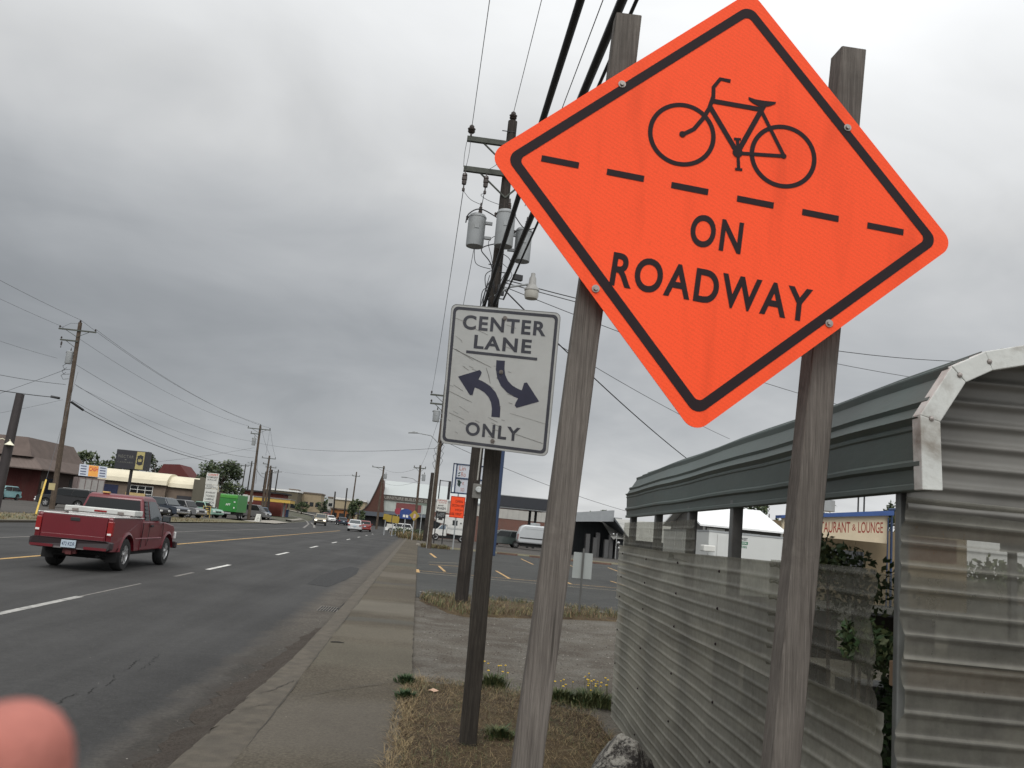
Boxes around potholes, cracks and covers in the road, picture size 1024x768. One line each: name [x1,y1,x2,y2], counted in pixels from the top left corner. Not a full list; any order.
drain grate [315,603,345,612]
